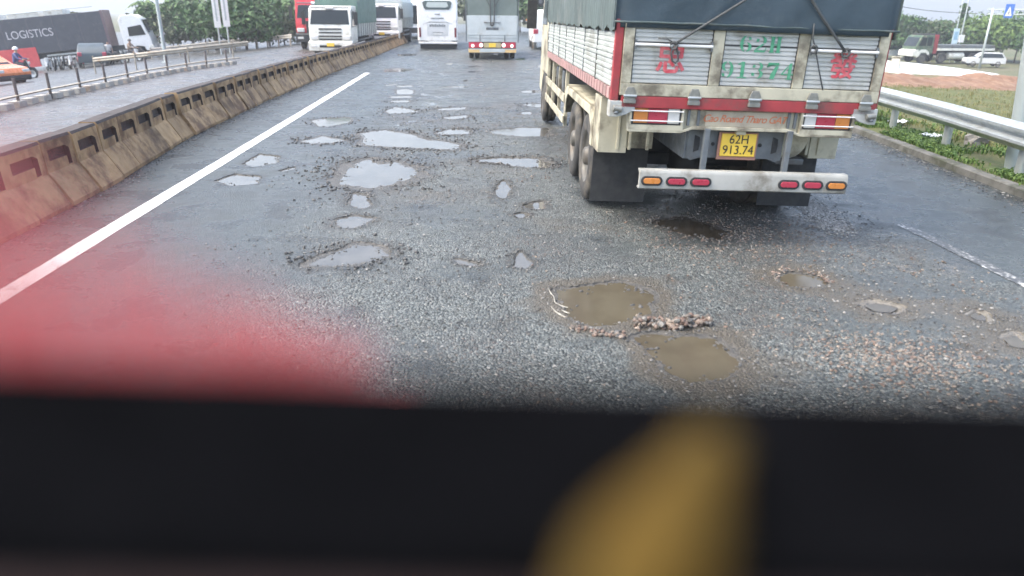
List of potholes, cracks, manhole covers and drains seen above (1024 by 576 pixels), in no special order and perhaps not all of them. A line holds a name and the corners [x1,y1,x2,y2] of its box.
pothole [214,173,262,186]
pothole [323,157,431,191]
pothole [513,250,534,269]
pothole [355,129,464,150]
pothole [652,215,734,239]
pothole [472,157,555,168]
pothole [490,127,553,137]
pothole [628,330,742,383]
pothole [493,179,513,198]
pothole [242,154,281,167]
pothole [854,298,908,314]
pothole [298,241,392,269]
